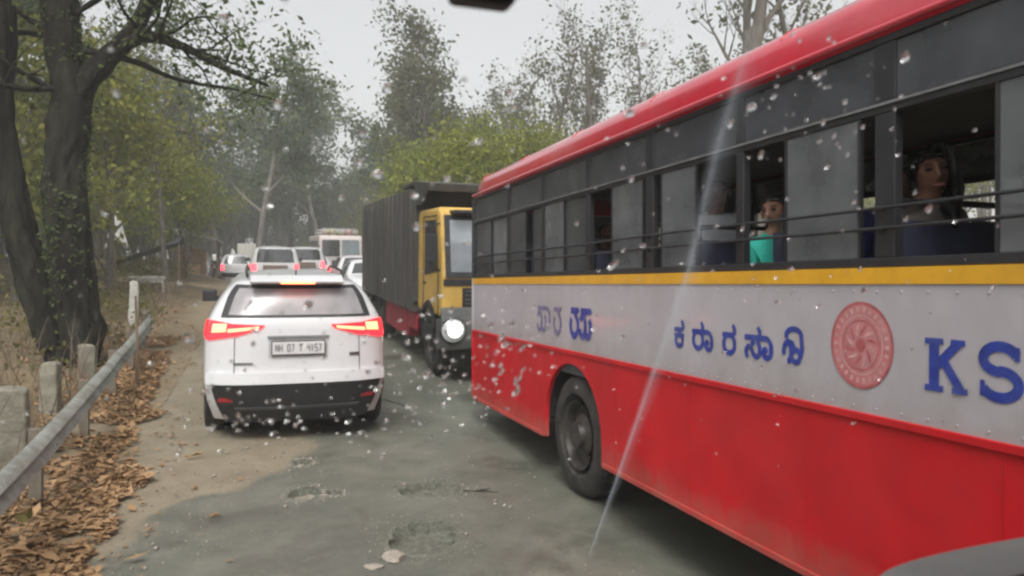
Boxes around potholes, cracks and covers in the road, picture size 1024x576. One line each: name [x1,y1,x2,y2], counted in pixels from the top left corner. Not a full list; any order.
pothole [394,481,465,499]
pothole [321,489,346,497]
pothole [283,486,328,502]
pothole [382,520,463,558]
pothole [289,458,317,468]
